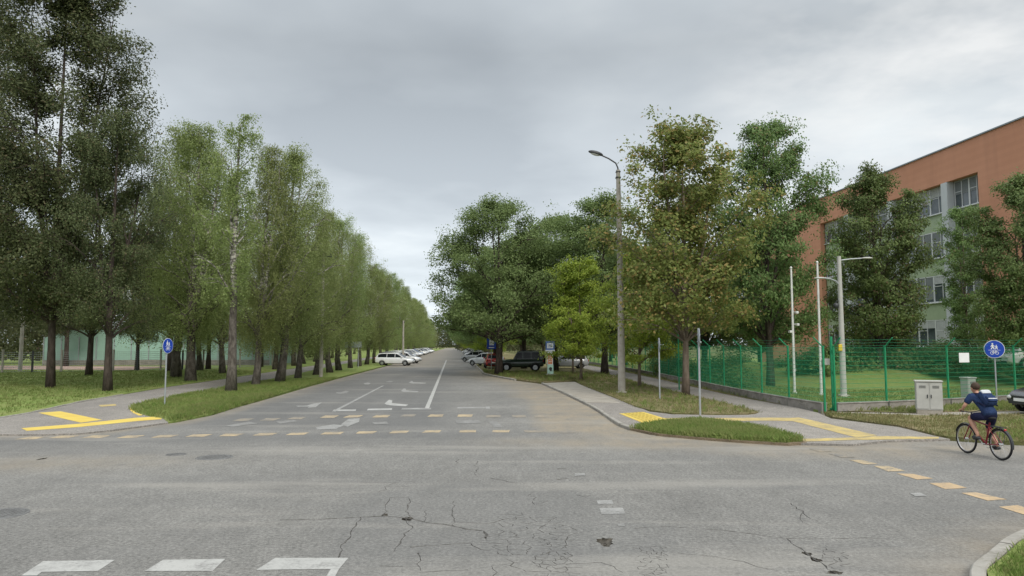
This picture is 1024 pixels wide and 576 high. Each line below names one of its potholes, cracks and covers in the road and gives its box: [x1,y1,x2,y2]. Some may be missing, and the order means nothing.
crack [296,460,849,576]
manhole cover [0,508,30,519]
pothole [596,538,613,547]
